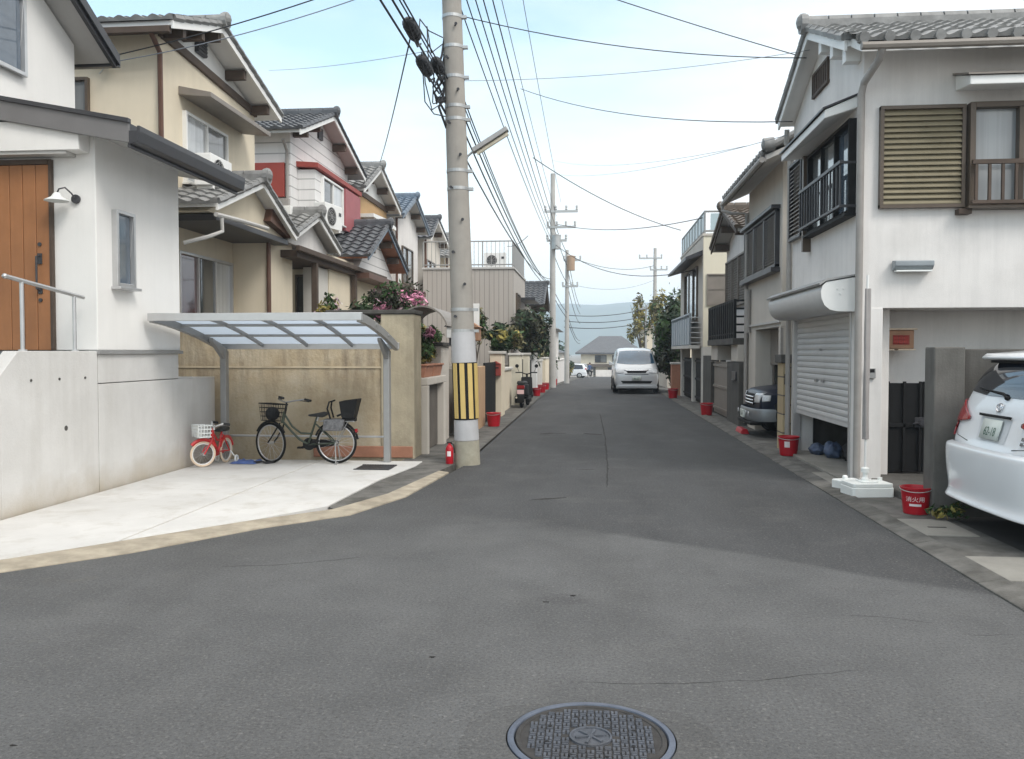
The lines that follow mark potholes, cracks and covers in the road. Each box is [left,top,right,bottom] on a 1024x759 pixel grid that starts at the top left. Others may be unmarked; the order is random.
crack [596,670,856,684]
manhole cover [507,702,676,759]
